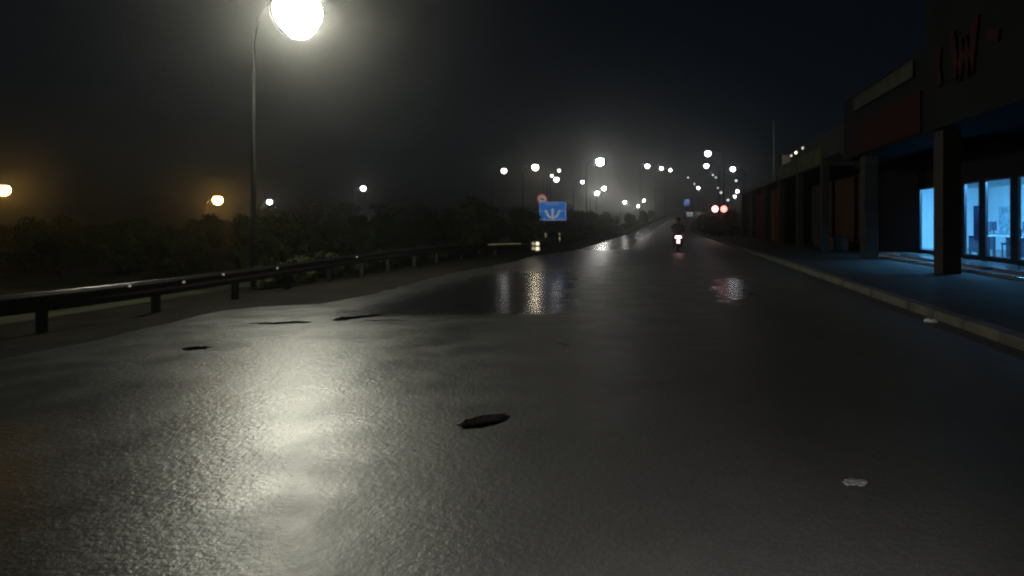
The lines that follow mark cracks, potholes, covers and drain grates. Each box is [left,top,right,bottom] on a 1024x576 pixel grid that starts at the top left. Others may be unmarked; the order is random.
pothole [457,413,511,430]
